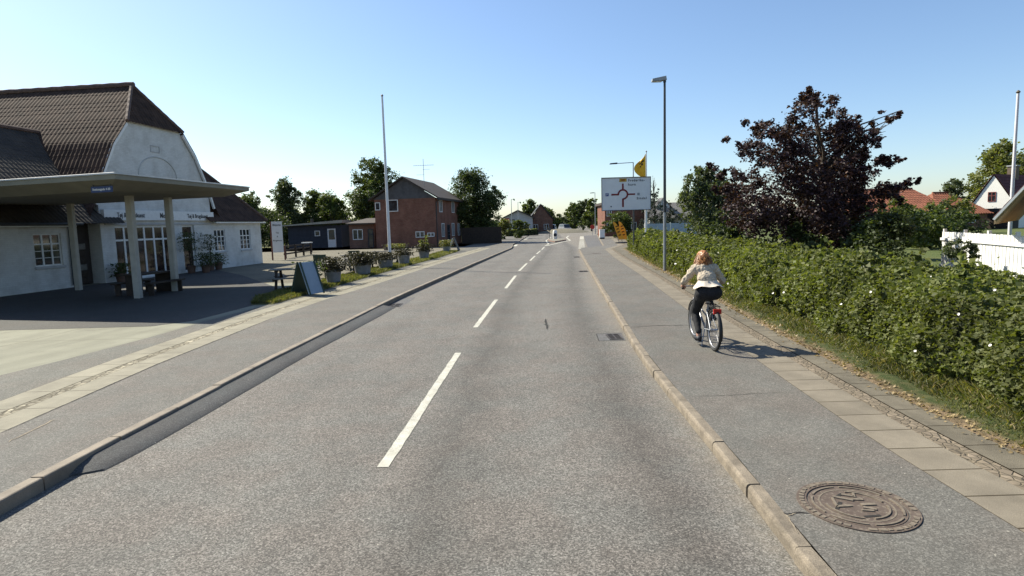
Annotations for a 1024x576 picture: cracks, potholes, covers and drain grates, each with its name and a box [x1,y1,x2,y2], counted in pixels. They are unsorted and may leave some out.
manhole cover [796,481,923,534]
drain grate [596,333,625,341]
